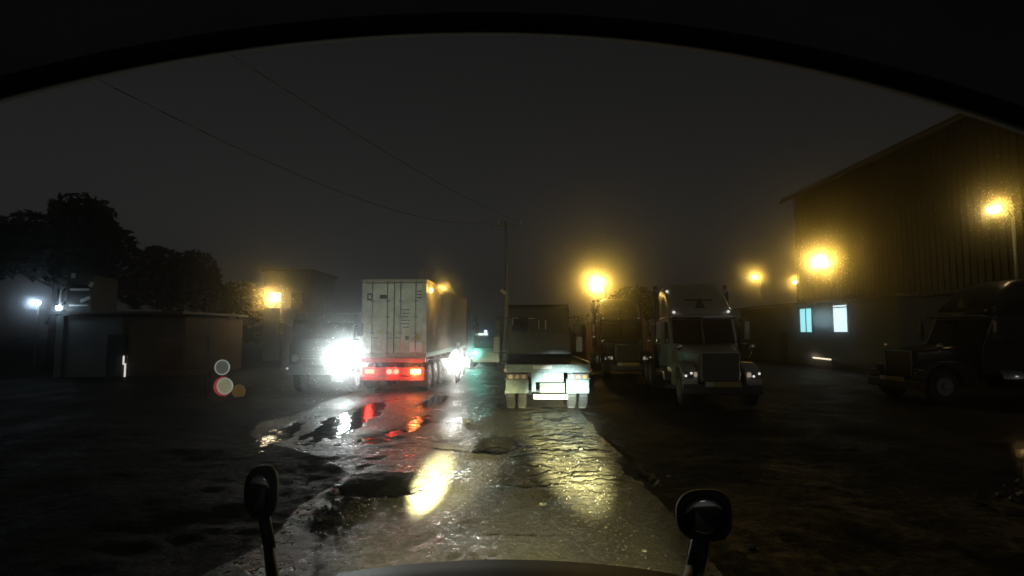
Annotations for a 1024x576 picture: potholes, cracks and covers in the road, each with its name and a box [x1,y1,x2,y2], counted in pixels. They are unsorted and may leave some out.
crack [515,428,612,452]
pothole [470,432,522,455]
pothole [328,470,434,500]
crack [495,455,601,489]
